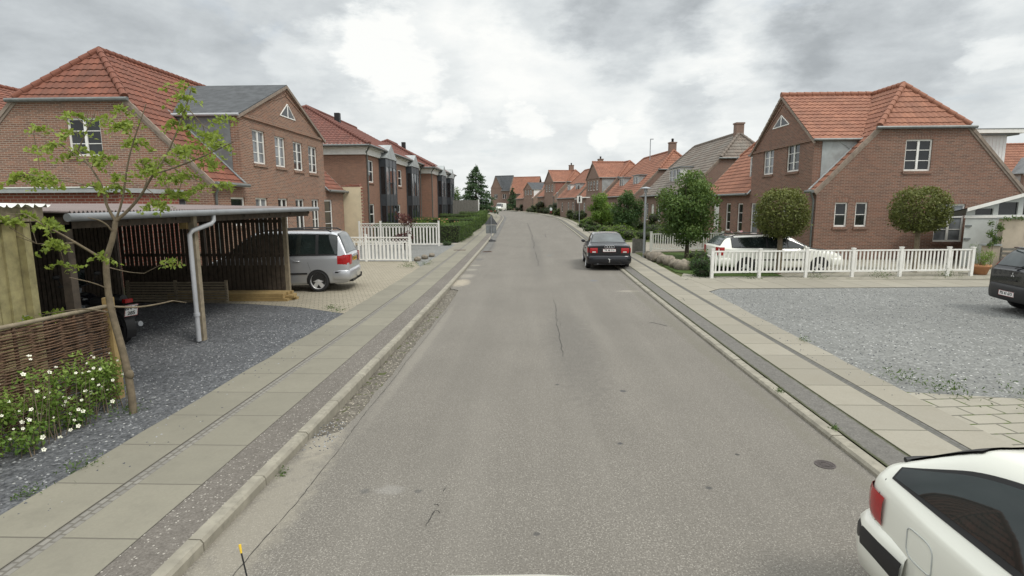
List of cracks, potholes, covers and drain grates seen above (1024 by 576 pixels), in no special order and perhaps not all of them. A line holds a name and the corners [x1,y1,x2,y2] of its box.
manhole cover [814,460,836,469]
